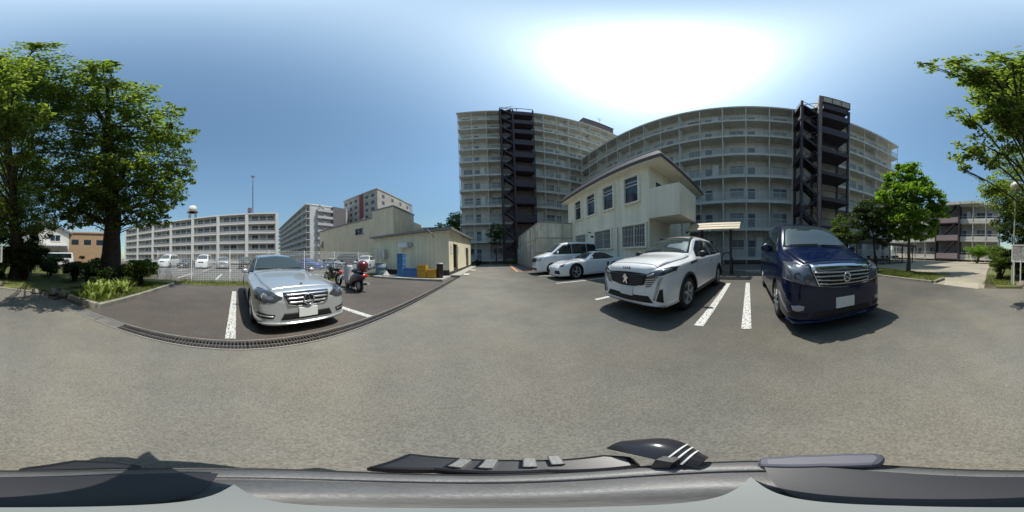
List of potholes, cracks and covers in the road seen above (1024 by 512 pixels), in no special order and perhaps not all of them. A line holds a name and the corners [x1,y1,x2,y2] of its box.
drain grate [175,337,247,349]
drain grate [247,334,319,349]
drain grate [390,301,416,312]
drain grate [359,310,396,325]
drain grate [312,321,368,339]
drain grate [119,325,179,343]
